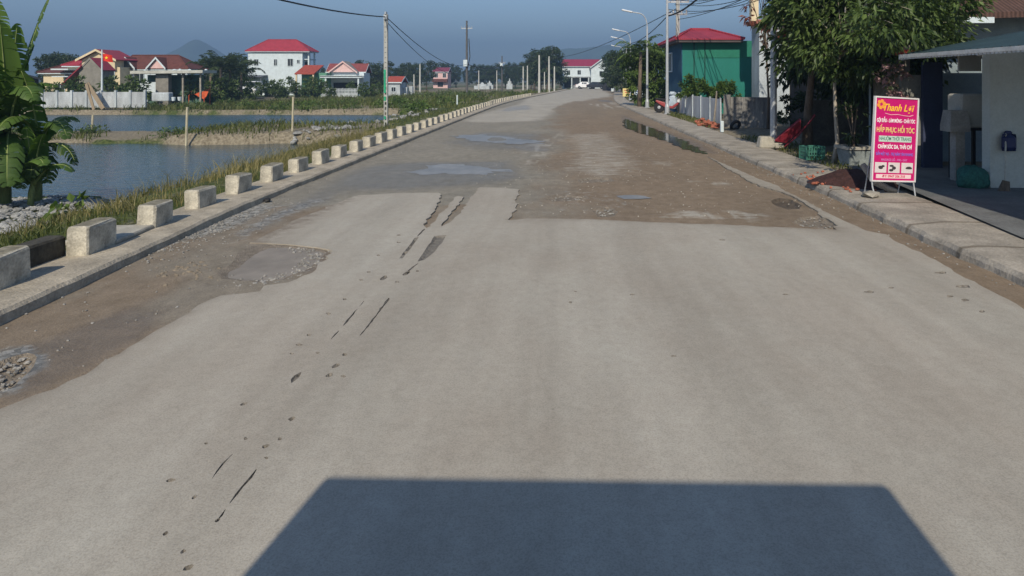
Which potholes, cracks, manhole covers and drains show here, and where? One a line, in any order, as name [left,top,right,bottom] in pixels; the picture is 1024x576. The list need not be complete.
pothole [217,244,327,282]
pothole [0,353,37,392]
crack [331,298,390,339]
crack [212,459,257,522]
pothole [418,235,446,261]
